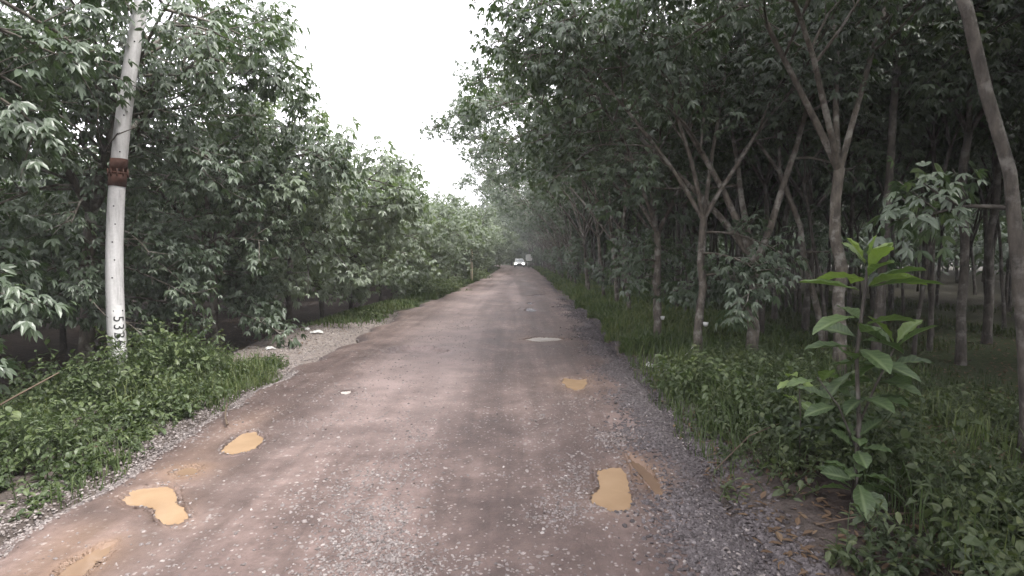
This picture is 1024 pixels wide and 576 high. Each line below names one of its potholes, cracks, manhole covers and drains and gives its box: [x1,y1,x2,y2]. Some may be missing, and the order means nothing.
pothole [48,538,121,576]
pothole [214,427,271,457]
pothole [111,481,196,529]
pothole [585,460,641,519]
pothole [625,450,668,500]
pothole [558,376,592,392]
pothole [167,463,208,479]
